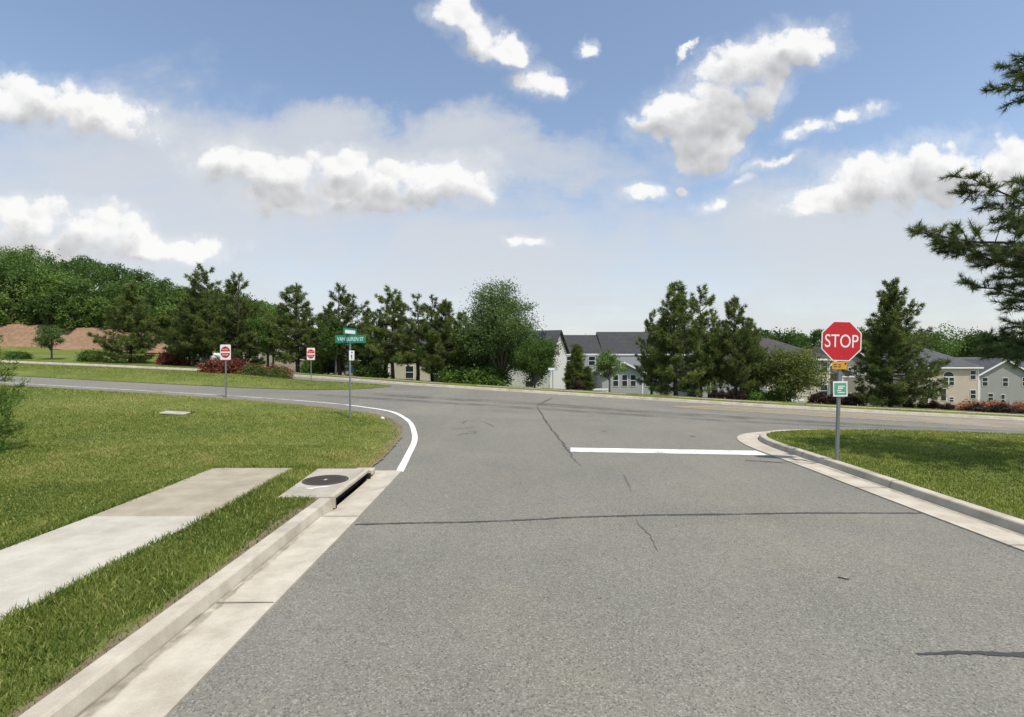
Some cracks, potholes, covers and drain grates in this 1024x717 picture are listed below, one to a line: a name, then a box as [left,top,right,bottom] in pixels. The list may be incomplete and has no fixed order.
manhole cover [302,475,349,486]
drain grate [278,468,375,509]
crack [536,398,581,466]
